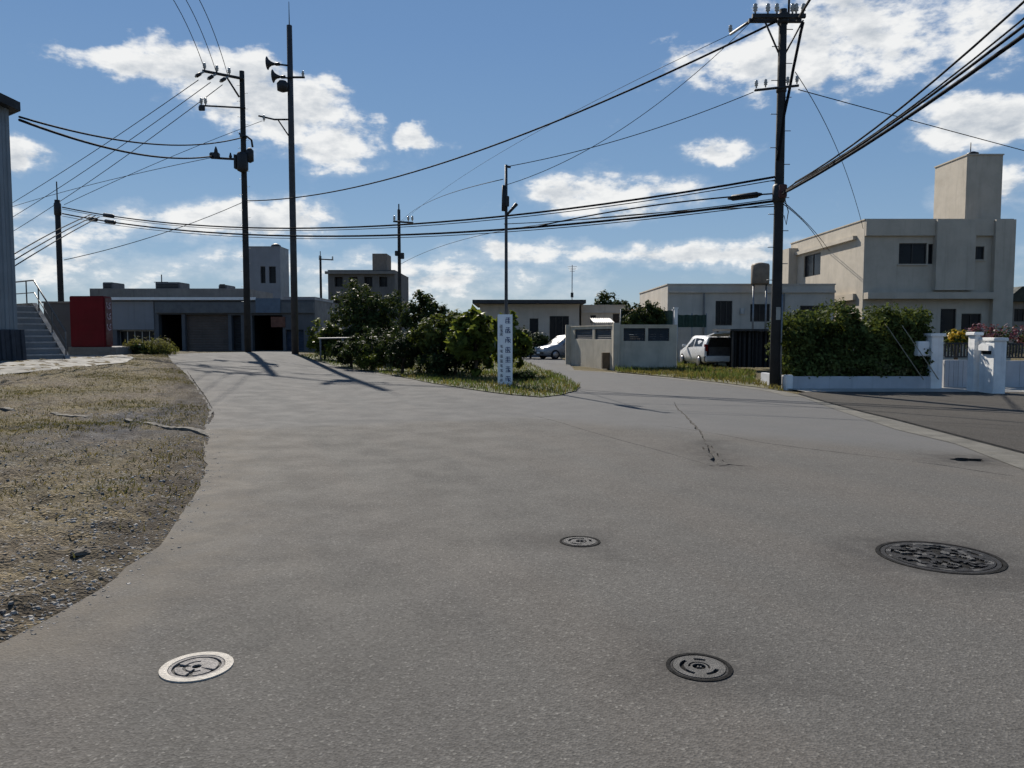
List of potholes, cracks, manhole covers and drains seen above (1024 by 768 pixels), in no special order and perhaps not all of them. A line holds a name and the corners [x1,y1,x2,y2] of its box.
crack [674,403,740,467]
manhole cover [159,652,234,683]
manhole cover [666,653,733,682]
manhole cover [875,541,1008,575]
manhole cover [560,536,600,547]
